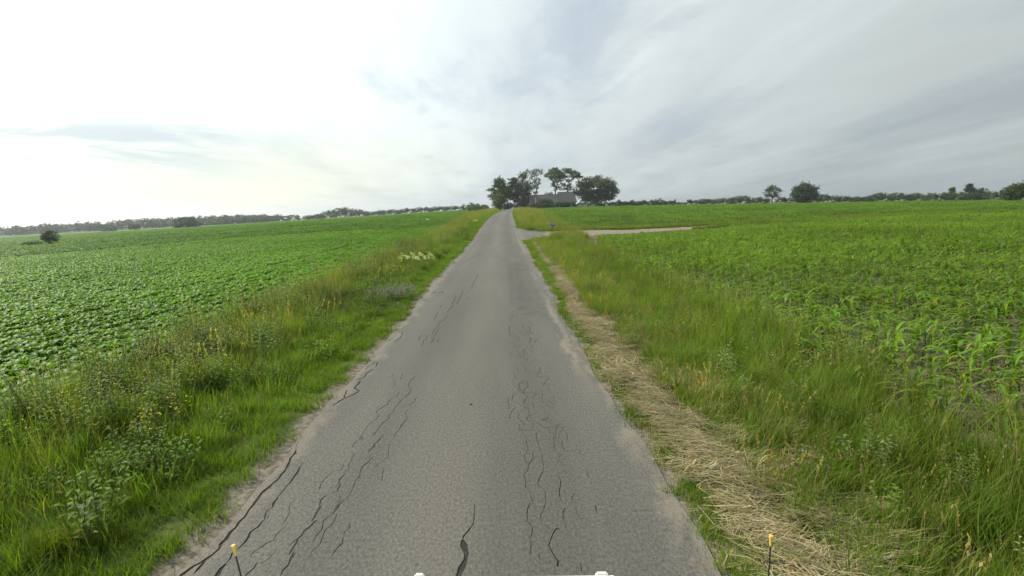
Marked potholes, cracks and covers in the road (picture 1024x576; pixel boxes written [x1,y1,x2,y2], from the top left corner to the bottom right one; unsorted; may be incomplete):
crack [508,263,590,566]
crack [390,257,478,346]
crack [180,361,416,576]
crack [456,504,475,576]
